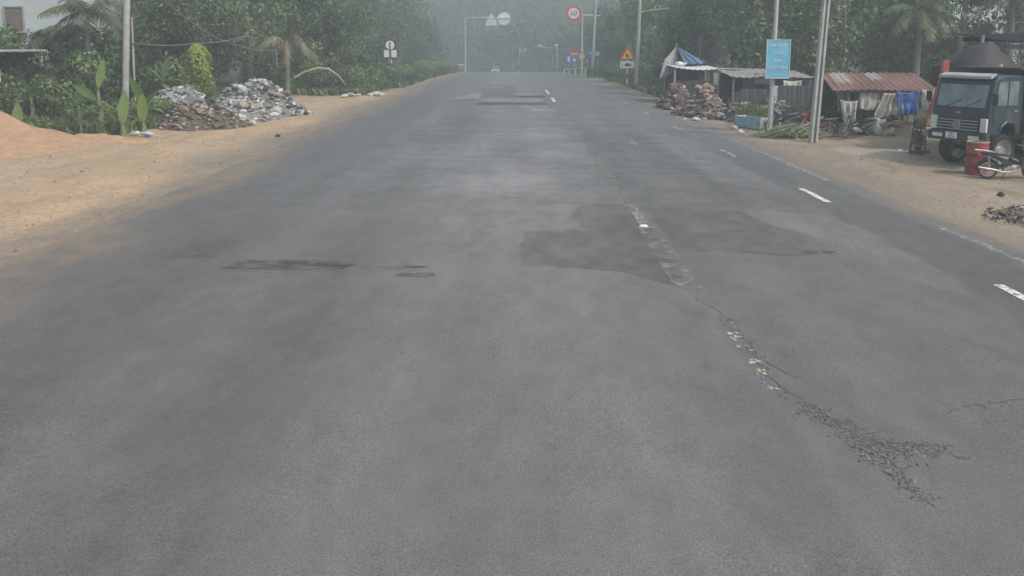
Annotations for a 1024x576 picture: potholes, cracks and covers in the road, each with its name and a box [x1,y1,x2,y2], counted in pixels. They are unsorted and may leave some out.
crack [695,291,973,512]
crack [941,396,1024,412]
